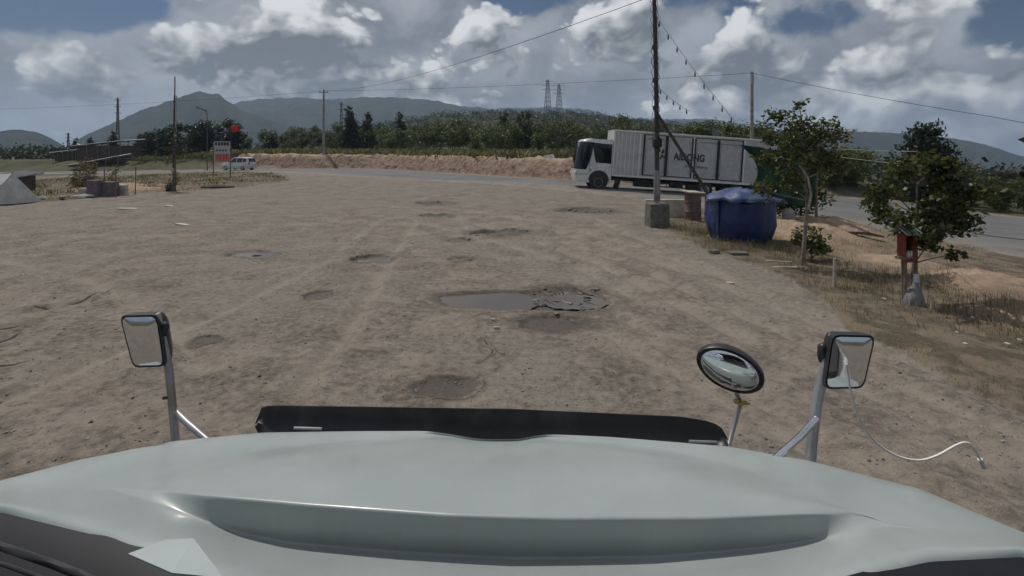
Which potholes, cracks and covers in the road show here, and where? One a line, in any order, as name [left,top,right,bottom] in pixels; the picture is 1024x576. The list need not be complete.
pothole [184,334,229,349]
pothole [532,283,613,313]
pothole [416,288,620,313]
pothole [299,289,337,301]
crack [470,333,503,362]
pothole [513,312,596,333]
pothole [401,373,485,400]
pothole [220,249,287,259]
pothole [463,227,538,237]
pothole [548,206,629,214]
pothole [345,253,397,264]
